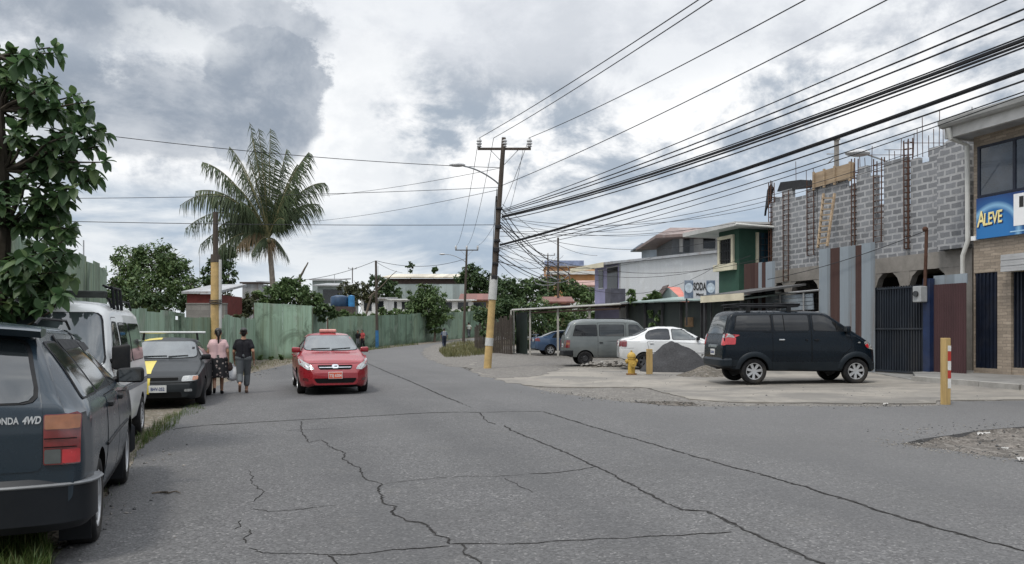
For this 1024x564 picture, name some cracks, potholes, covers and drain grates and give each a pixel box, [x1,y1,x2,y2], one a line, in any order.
pothole [904,428,1024,461]
crack [174,364,1024,564]
